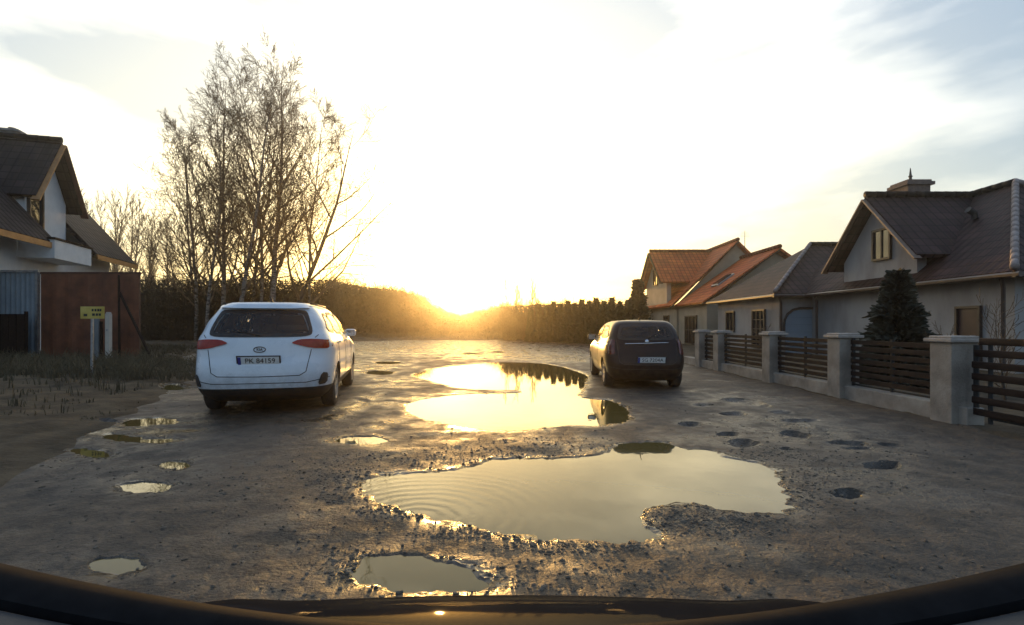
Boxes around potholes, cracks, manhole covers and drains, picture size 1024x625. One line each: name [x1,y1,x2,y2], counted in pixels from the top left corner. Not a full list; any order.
pothole [333,435,390,444]
pothole [357,440,797,545]
pothole [862,460,902,470]
pothole [728,438,761,448]
pothole [347,551,498,595]
pothole [63,446,115,458]
pothole [779,430,812,438]
pothole [157,460,194,470]
pothole [87,554,147,574]
pothole [402,362,632,431]
pothole [98,432,179,444]
